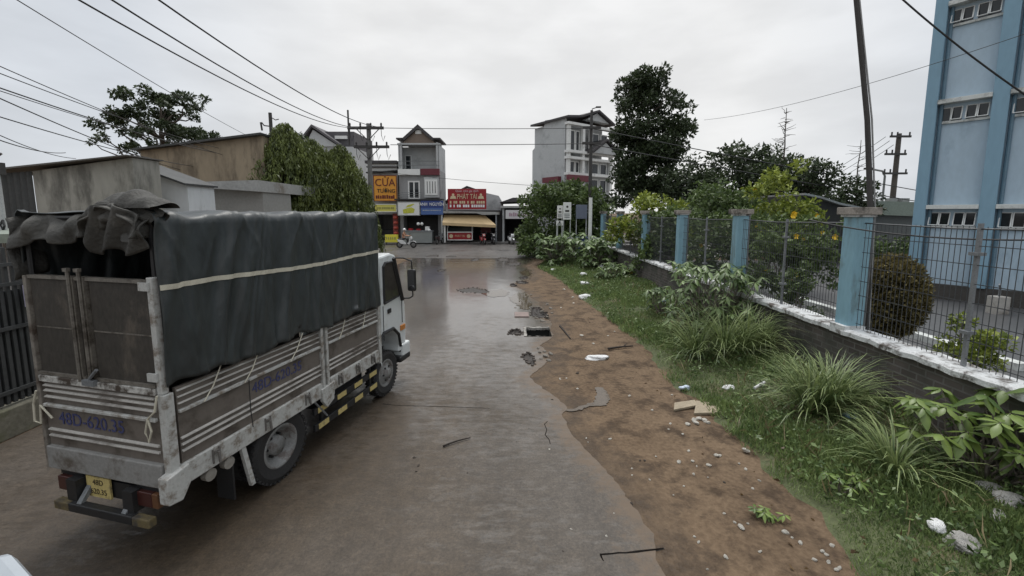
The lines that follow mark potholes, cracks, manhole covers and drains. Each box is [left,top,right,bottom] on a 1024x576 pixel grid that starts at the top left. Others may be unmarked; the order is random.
crack [600,547,664,561]
drain grate [523,326,552,337]
pothole [529,307,549,318]
pothole [520,351,536,366]
